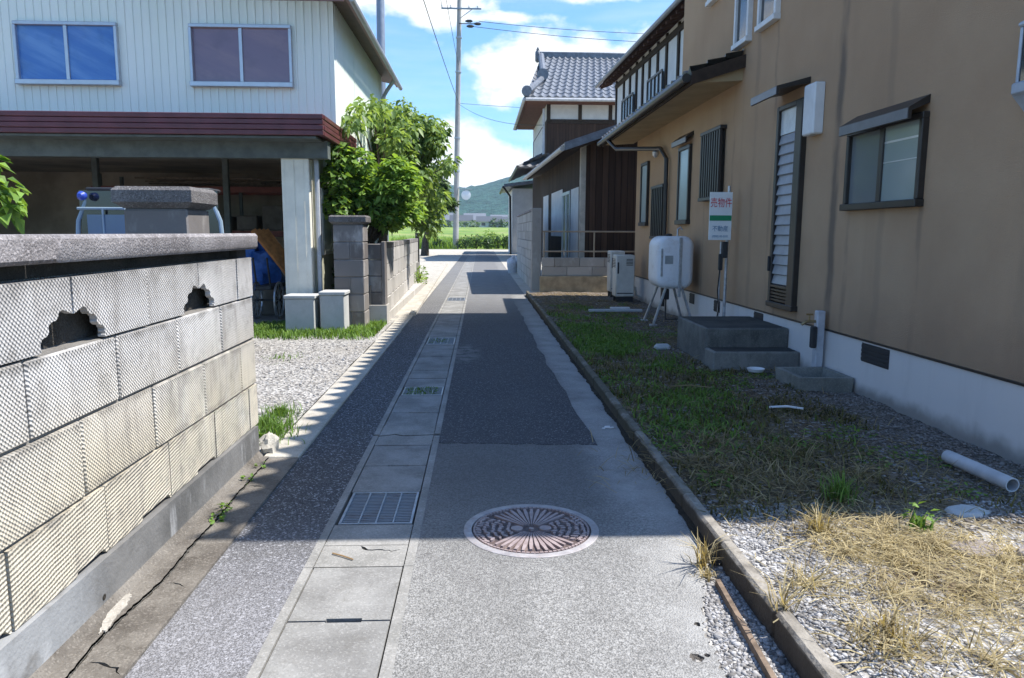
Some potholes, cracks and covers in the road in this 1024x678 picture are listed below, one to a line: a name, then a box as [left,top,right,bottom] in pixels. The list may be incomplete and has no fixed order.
drain grate [338,492,419,531]
manhole cover [464,504,599,558]
drain grate [426,338,456,346]
drain grate [401,387,444,395]
